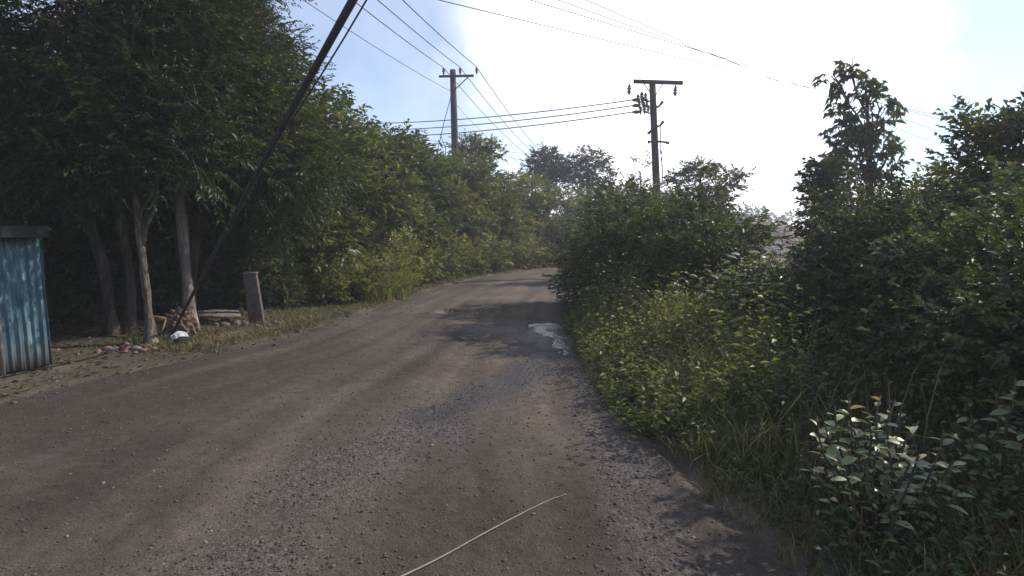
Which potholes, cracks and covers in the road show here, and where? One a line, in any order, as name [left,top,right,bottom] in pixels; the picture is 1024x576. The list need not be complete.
pothole [516,319,581,358]
